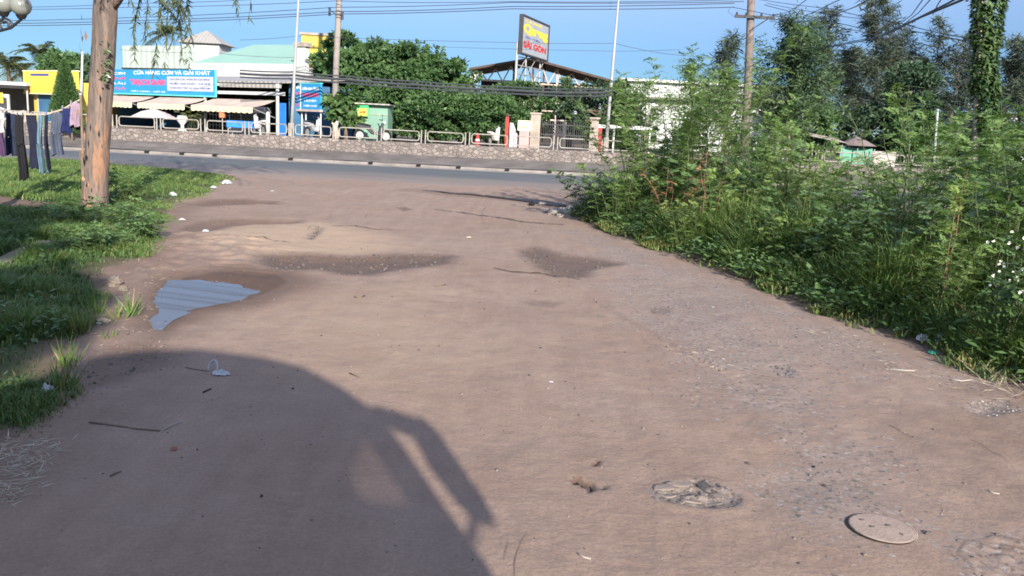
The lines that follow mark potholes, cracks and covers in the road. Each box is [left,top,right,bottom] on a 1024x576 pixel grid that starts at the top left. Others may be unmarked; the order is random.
pothole [651,480,738,508]
crack [496,268,579,279]
pothole [969,400,1017,416]
pothole [523,248,612,277]
pothole [150,271,284,330]
pothole [949,533,1024,576]
manhole cover [845,513,918,544]
pothole [260,254,445,274]
